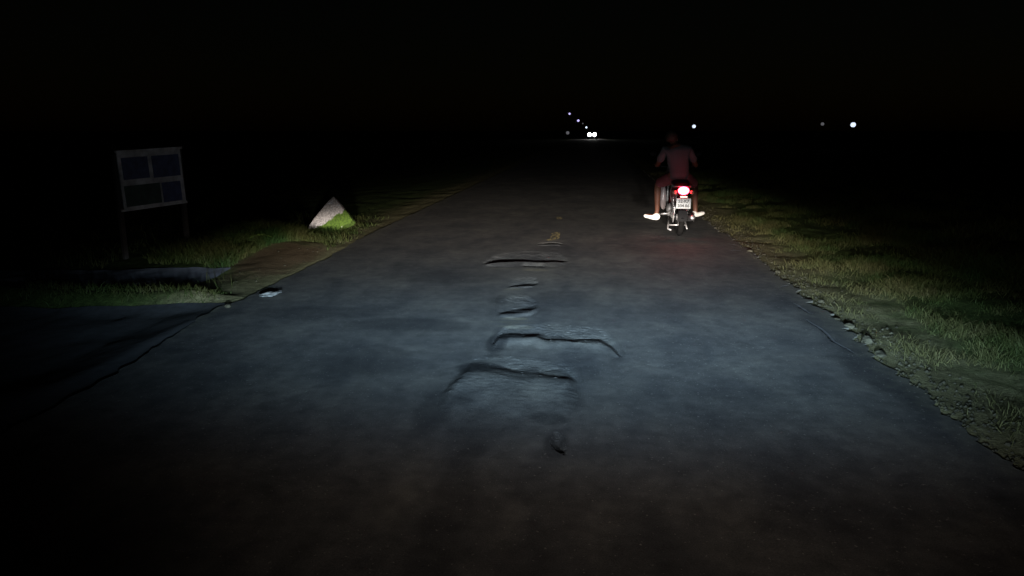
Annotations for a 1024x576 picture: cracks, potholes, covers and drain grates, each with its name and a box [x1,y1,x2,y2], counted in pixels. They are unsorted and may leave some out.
crack [780,285,854,353]
pothole [549,430,568,457]
pothole [481,250,569,271]
pothole [506,275,540,289]
pothole [495,293,541,321]
pothole [489,323,626,358]
pothole [438,354,585,439]
